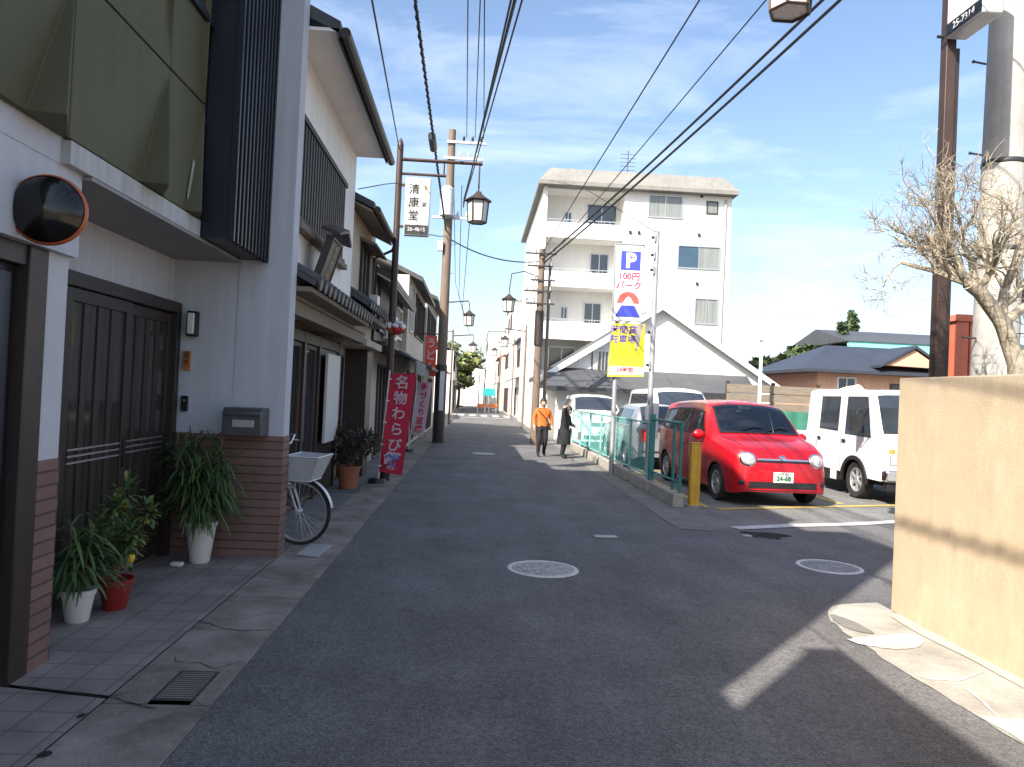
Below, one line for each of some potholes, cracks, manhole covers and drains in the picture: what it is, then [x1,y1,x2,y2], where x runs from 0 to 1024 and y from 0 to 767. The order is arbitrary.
crack [914,671,1000,718]
manhole cover [796,559,864,575]
manhole cover [507,560,579,578]
drain grate [151,671,220,701]
